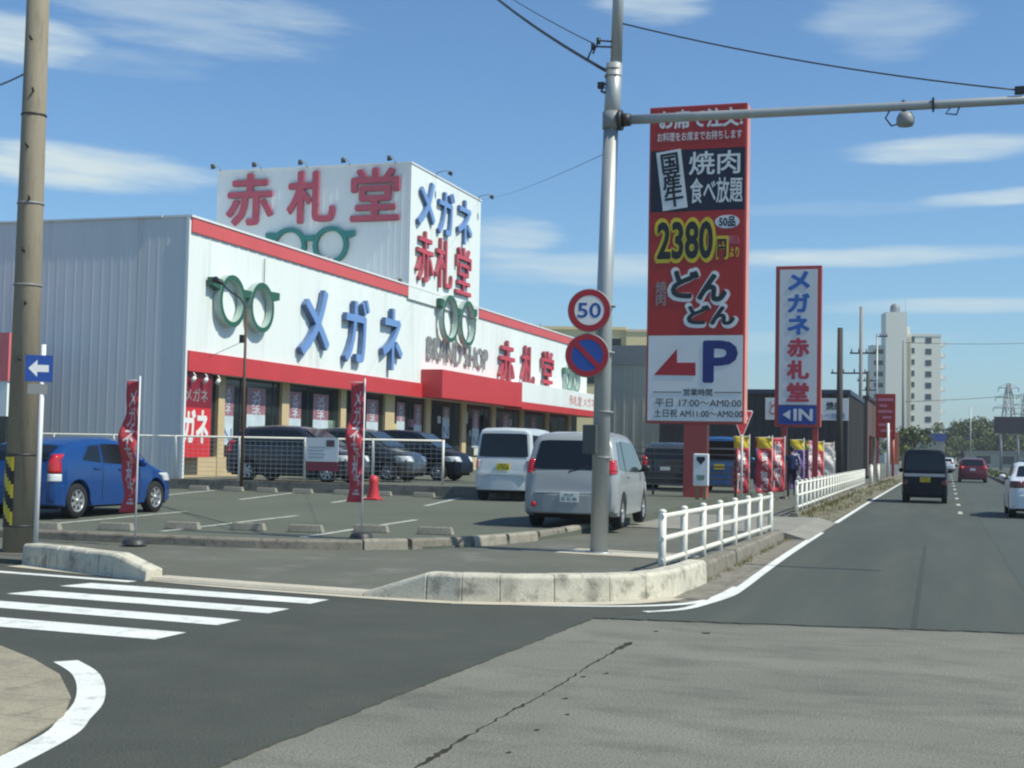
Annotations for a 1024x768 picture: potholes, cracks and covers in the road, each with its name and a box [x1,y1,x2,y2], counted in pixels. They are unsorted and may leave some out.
crack [414,642,633,768]
